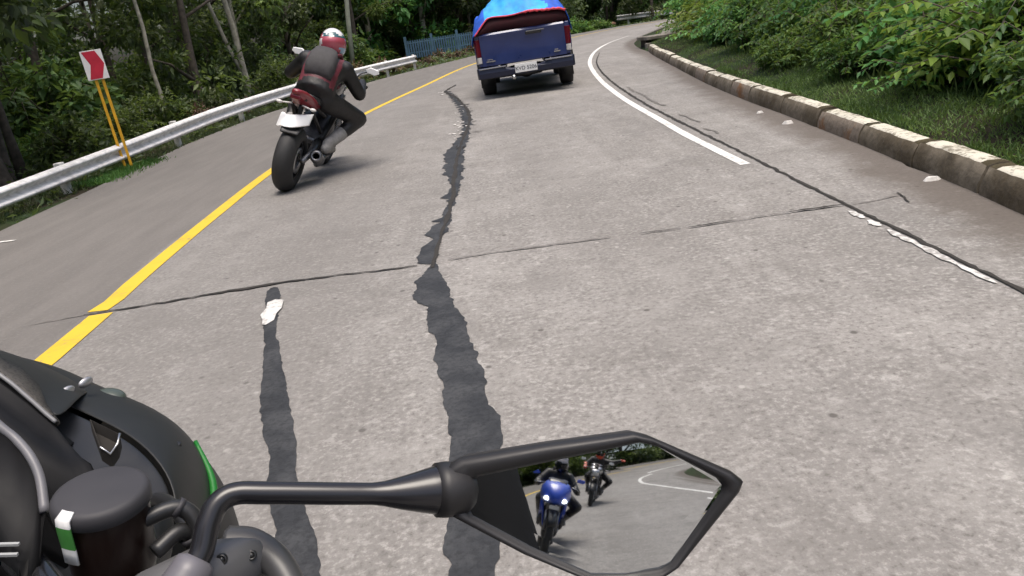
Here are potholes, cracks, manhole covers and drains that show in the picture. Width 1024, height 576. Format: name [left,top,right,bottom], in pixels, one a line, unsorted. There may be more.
crack [30,192,910,325]
